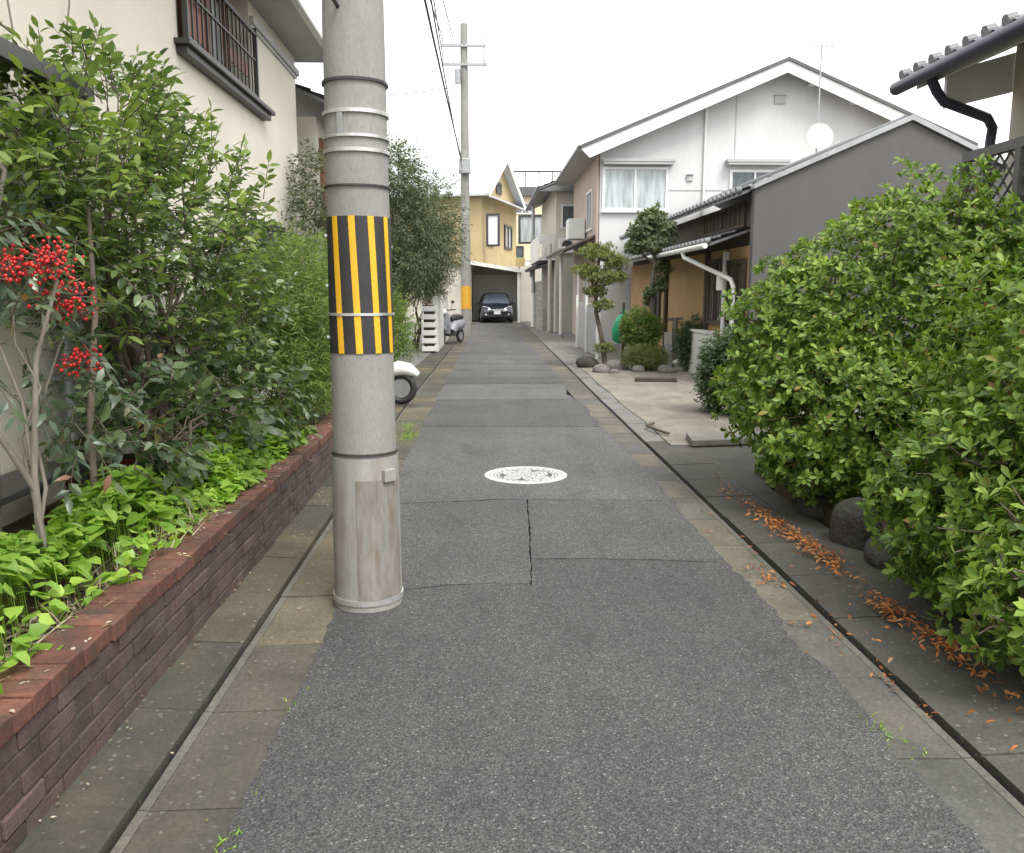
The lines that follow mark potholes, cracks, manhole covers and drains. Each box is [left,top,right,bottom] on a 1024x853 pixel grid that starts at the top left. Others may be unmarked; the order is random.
manhole cover [485,466,567,484]
crack [406,499,702,590]
